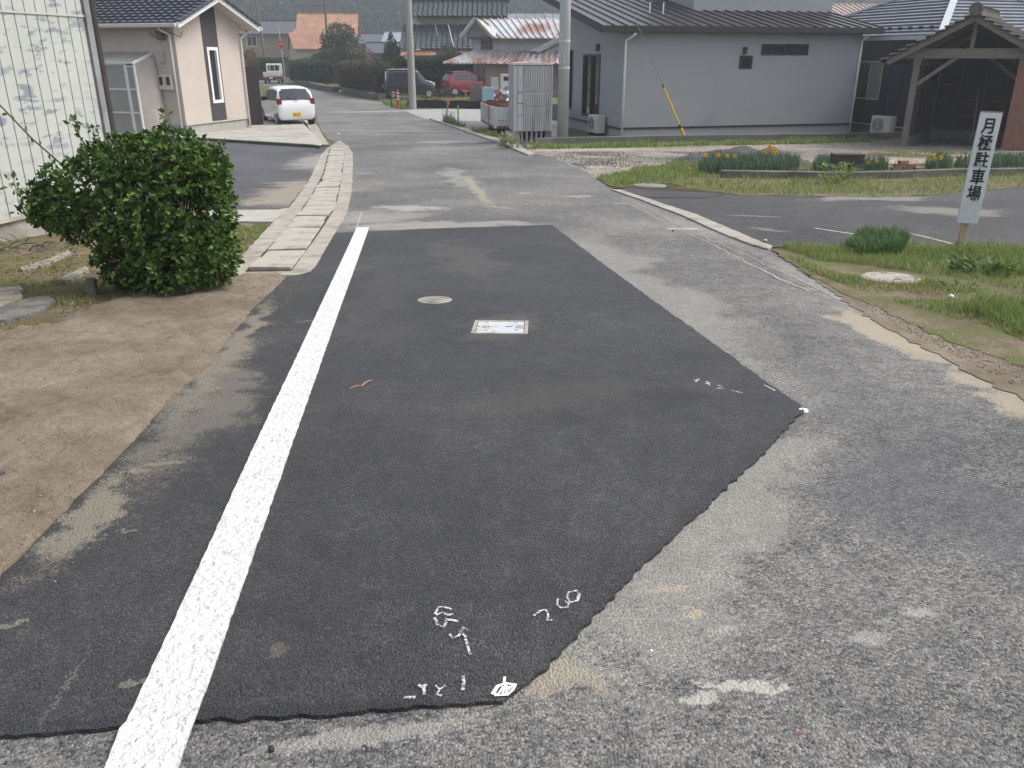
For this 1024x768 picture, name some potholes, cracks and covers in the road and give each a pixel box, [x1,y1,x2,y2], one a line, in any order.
utility cover [417,296,452,304]
manhole cover [860,272,921,284]
utility cover [471,320,528,334]
